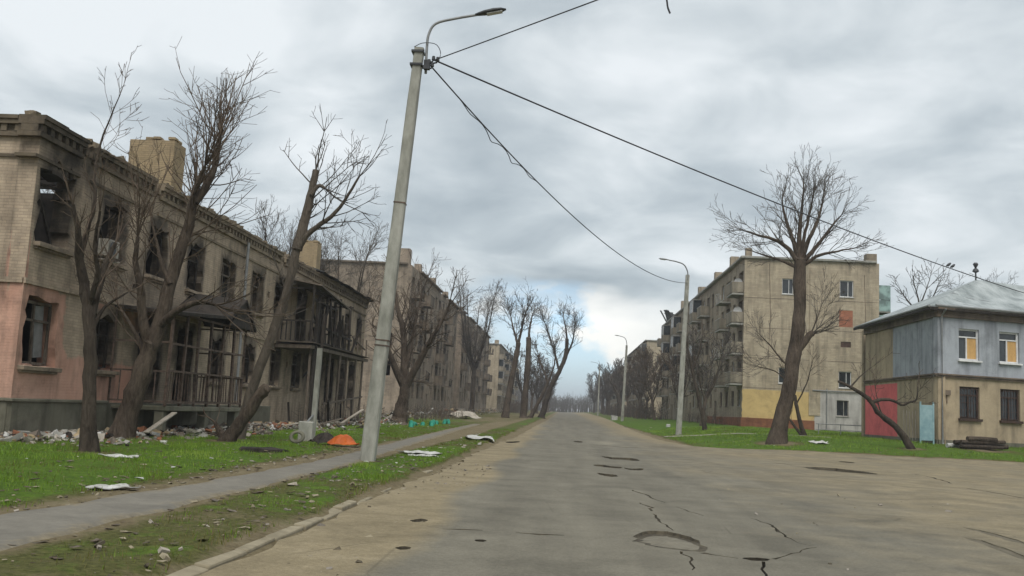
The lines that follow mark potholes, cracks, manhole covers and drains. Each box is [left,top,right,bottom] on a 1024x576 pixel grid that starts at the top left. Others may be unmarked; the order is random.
crack [680,551,734,570]
crack [632,490,704,530]
pothole [633,531,708,552]
crack [752,518,816,576]
